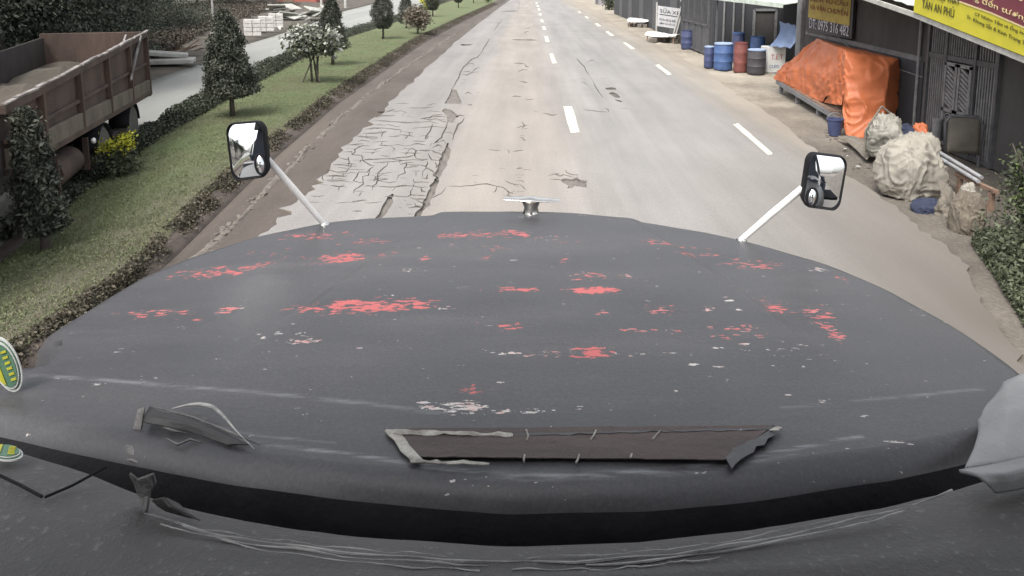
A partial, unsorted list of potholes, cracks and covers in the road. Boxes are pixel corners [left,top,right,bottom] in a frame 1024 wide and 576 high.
crack [310,2,557,215]
pothole [445,89,461,104]
pothole [376,194,393,218]
pothole [549,170,587,188]
crack [577,59,627,112]
